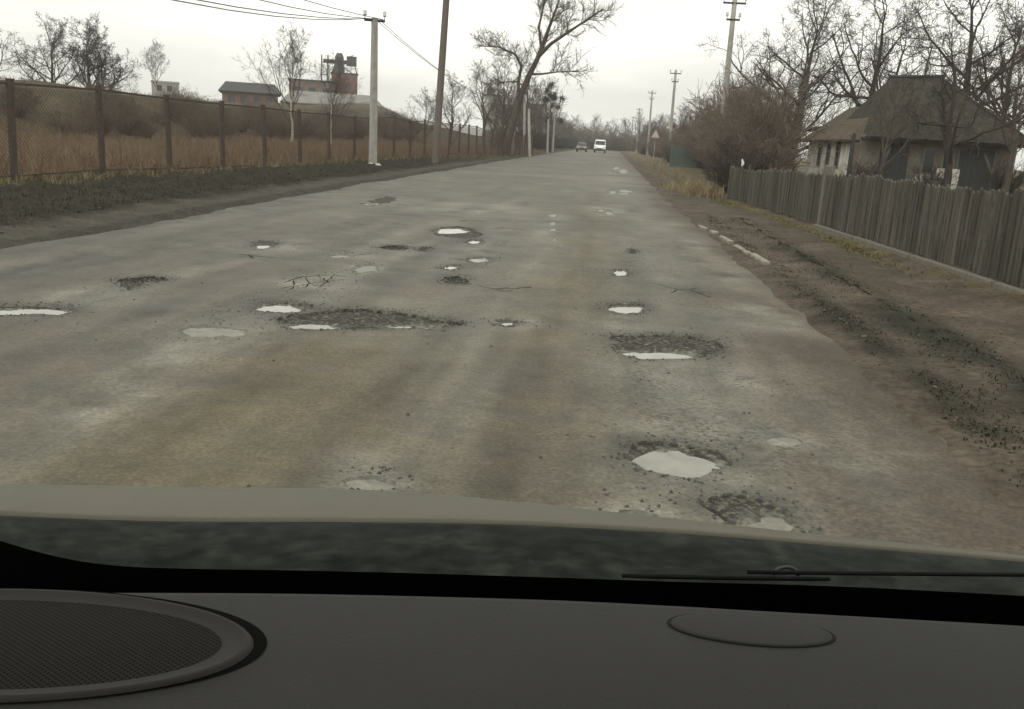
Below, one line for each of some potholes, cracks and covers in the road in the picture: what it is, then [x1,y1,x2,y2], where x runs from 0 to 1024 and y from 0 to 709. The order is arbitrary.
pothole [609,334,726,359]
crack [281,275,345,290]
pothole [177,326,247,337]
pothole [442,276,470,284]
pothole [606,303,646,314]
pothole [360,197,397,206]
pothole [117,276,167,290]
pothole [255,303,314,312]
pothole [276,309,465,330]
pothole [765,436,804,447]
pothole [432,226,483,238]
pothole [622,440,735,478]
